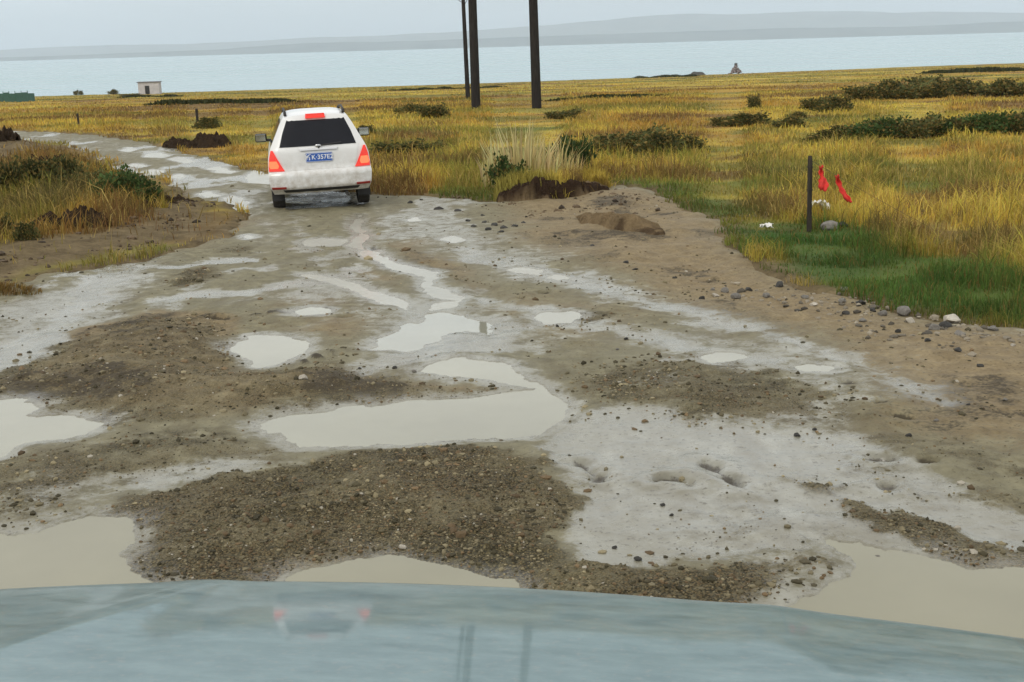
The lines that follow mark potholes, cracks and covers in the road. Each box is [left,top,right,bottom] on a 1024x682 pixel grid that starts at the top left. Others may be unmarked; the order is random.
pothole [250,355,574,449]
pothole [653,473,694,486]
pothole [0,511,160,589]
pothole [774,532,1024,638]
pothole [225,333,314,369]
pothole [0,395,110,459]
pothole [698,460,746,488]
pothole [273,549,528,588]
